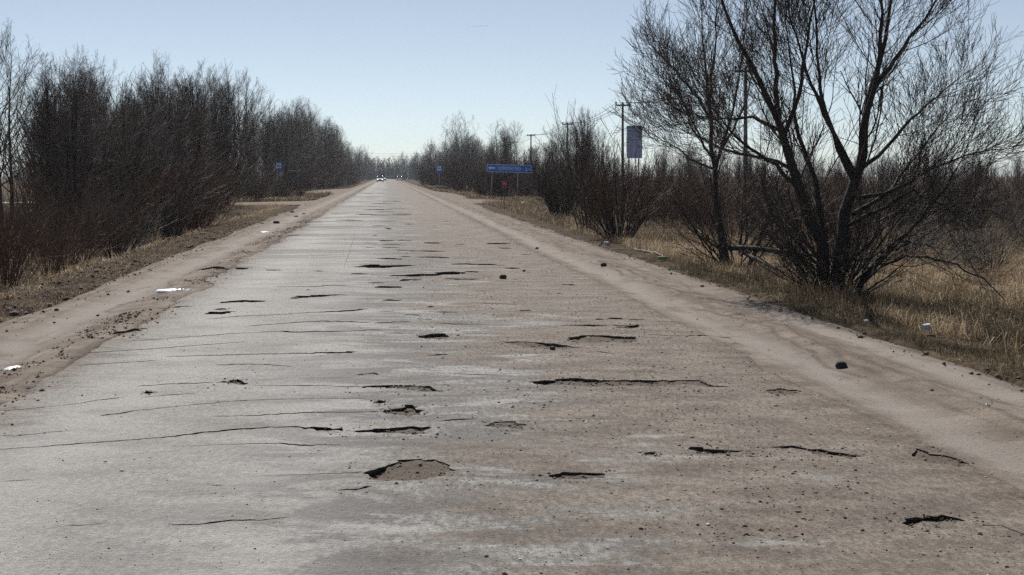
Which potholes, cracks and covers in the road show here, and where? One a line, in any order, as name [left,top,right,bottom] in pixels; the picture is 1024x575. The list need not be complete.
pothole [347,426,431,435]
pothole [502,341,579,349]
pothole [382,405,423,417]
pothole [568,335,637,343]
